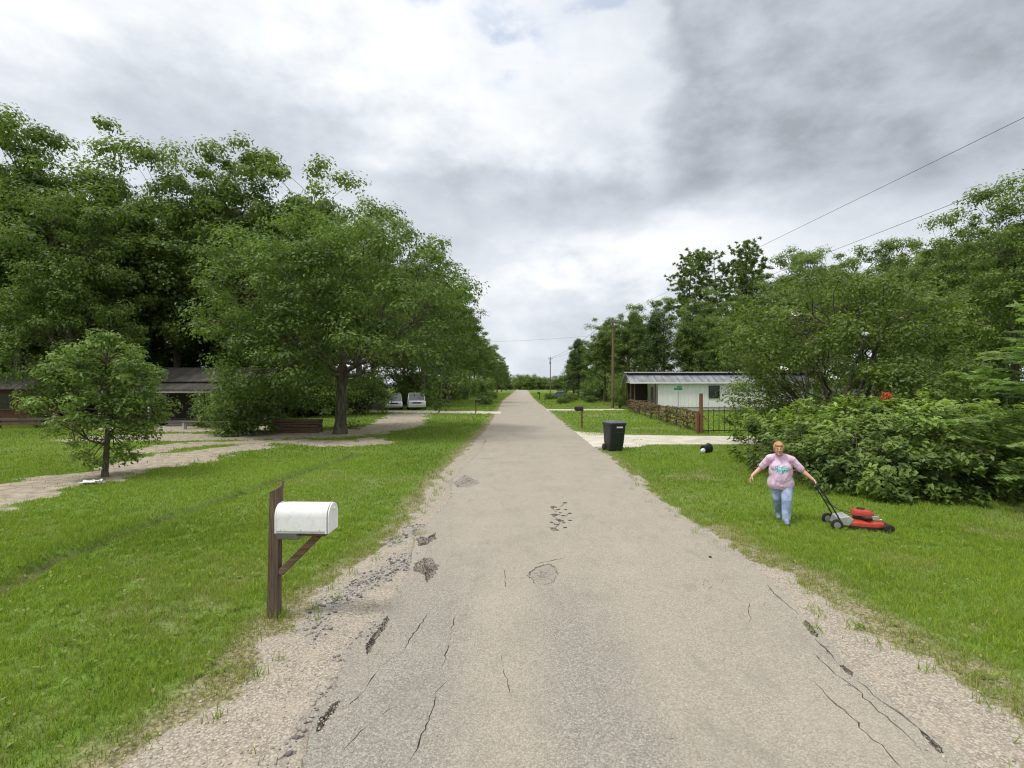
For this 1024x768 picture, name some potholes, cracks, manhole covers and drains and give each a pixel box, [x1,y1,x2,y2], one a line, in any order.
pothole [413,557,439,582]
pothole [416,533,437,546]
crack [350,615,427,704]
pothole [365,615,390,654]
pothole [549,502,572,531]
crack [409,619,454,762]
crack [809,639,922,766]
pothole [316,700,341,733]
